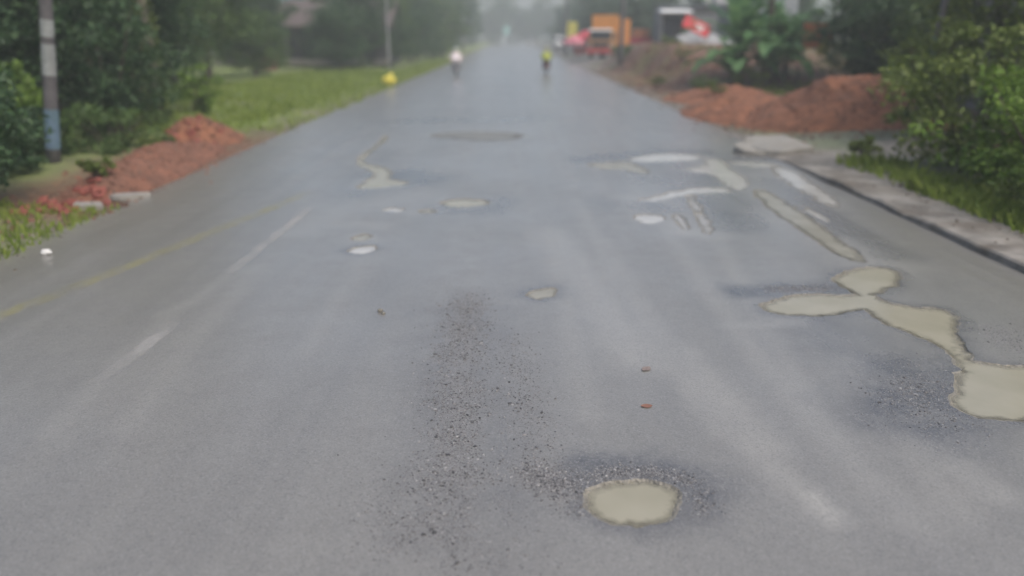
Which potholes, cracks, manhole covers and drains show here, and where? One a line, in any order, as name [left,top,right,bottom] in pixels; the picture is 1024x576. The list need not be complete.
pothole [752,189,869,263]
pothole [684,159,750,190]
pothole [638,187,732,201]
pothole [864,295,975,372]
pothole [627,153,703,162]
pothole [439,198,491,208]
pothole [525,287,558,300]
pothole [947,361,1024,422]
pothole [633,214,666,224]
pothole [831,266,904,296]
pothole [758,293,876,317]
pothole [583,478,683,528]
